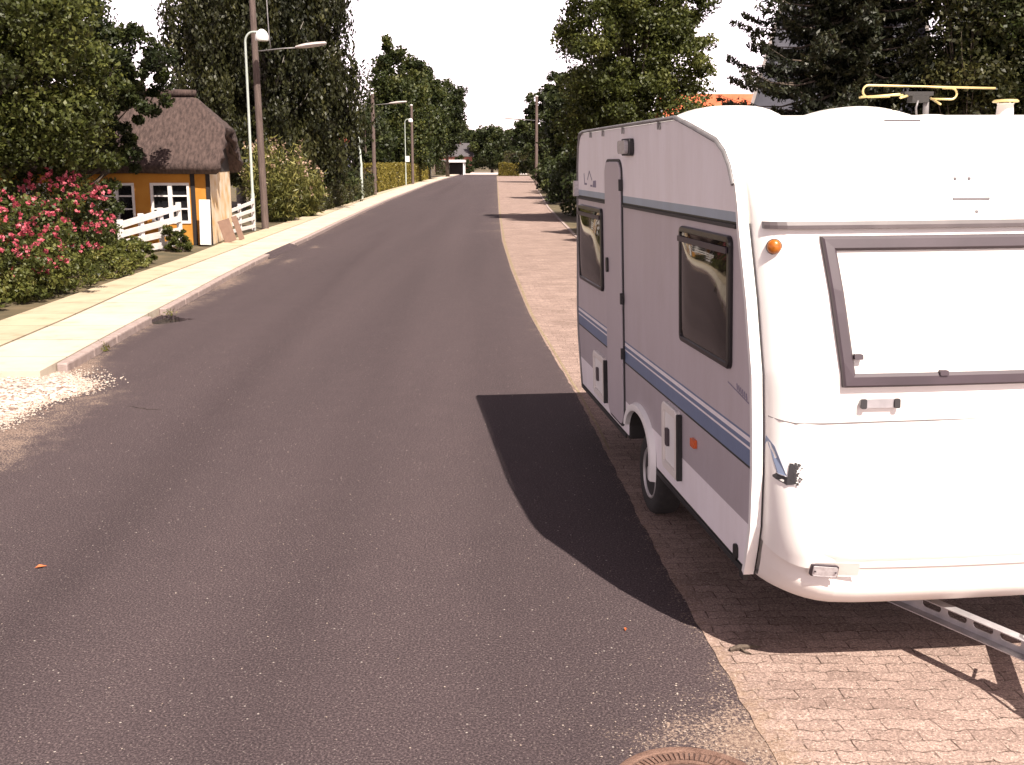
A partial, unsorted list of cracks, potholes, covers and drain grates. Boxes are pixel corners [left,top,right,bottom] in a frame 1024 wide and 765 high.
manhole cover [620,747,747,765]
pothole [152,315,192,324]
